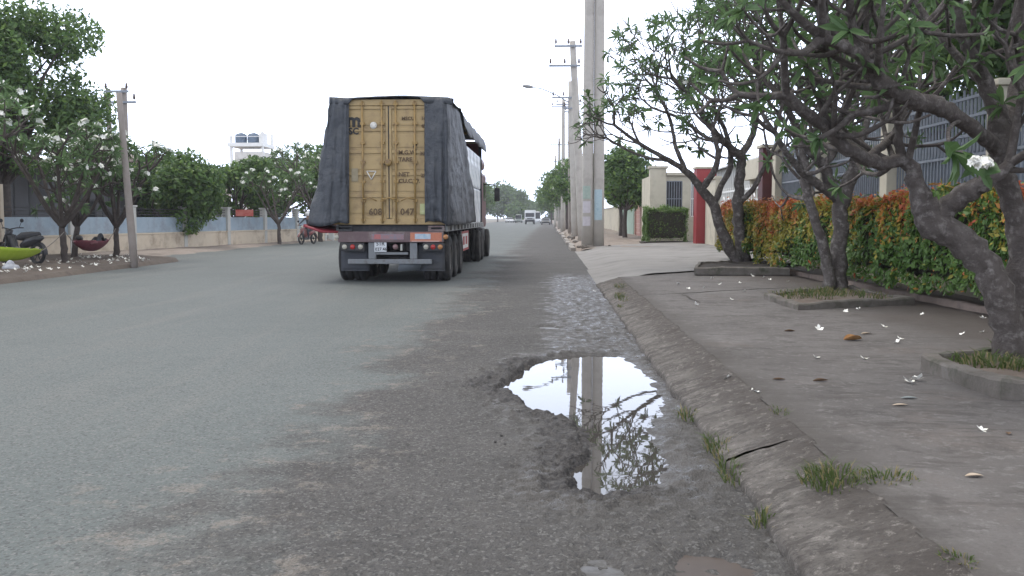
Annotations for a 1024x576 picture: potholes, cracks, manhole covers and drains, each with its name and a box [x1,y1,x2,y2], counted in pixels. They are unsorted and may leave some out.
pothole [482,350,695,501]
